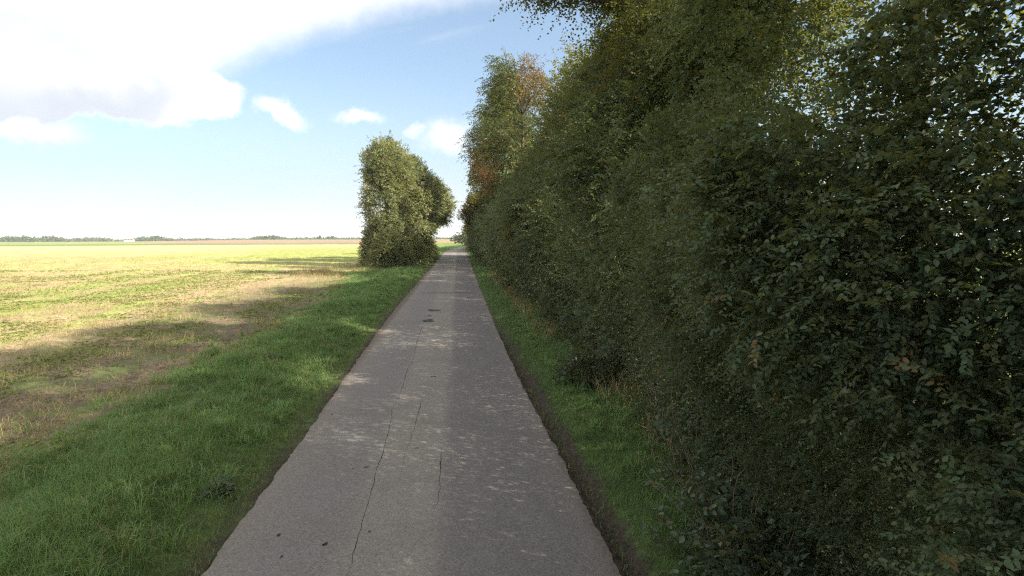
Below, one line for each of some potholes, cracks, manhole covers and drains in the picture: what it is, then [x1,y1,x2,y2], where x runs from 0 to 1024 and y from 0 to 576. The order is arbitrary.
crack [347,328,422,575]
